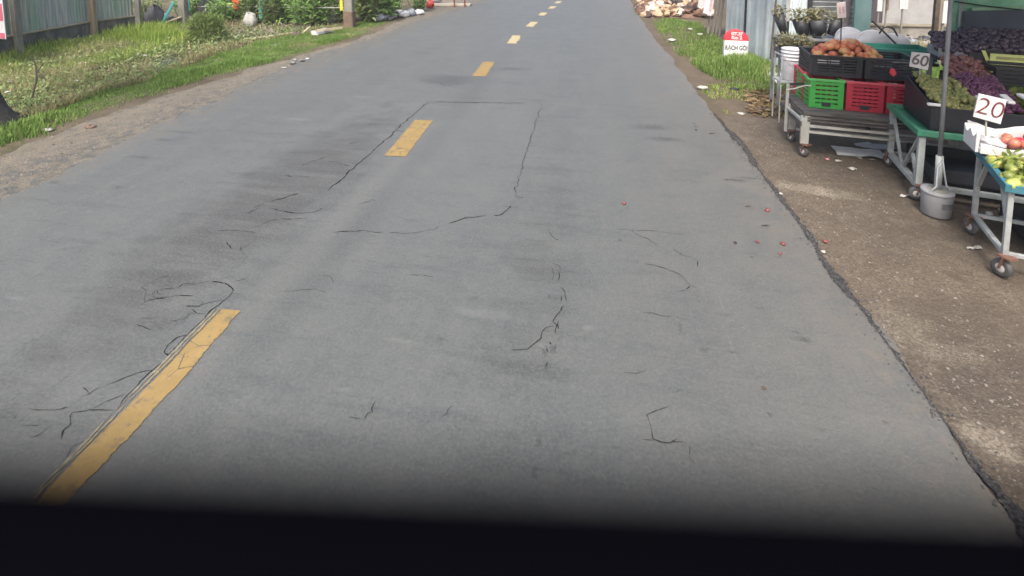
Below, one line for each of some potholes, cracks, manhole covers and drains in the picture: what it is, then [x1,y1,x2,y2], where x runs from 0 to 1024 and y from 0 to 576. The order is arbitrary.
crack [14,276,245,448]
crack [625,112,1002,490]
crack [252,82,500,224]
crack [512,230,566,367]
